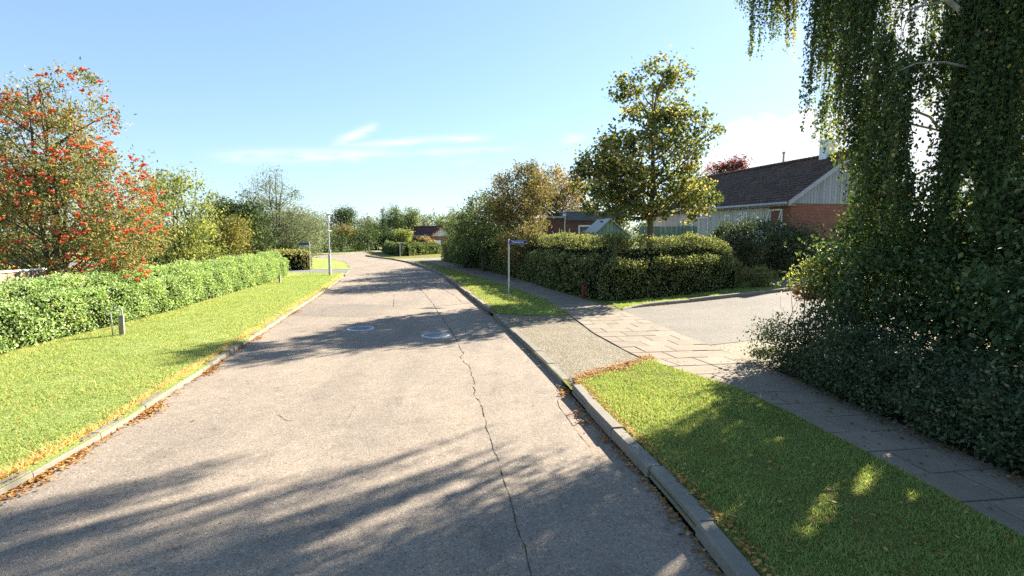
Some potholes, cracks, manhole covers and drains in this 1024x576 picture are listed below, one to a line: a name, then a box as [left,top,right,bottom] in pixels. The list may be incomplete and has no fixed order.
crack [413,283,532,576]
